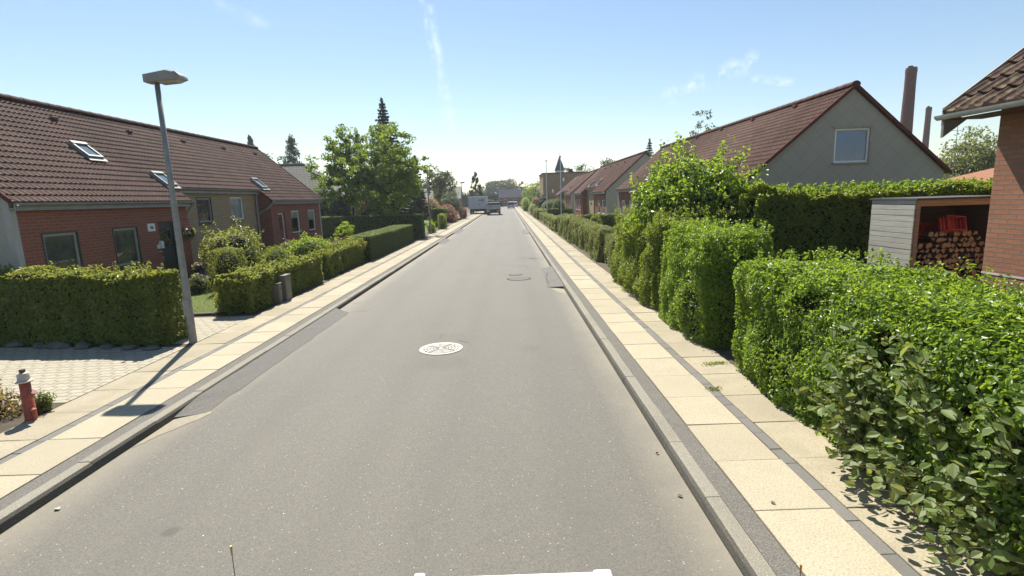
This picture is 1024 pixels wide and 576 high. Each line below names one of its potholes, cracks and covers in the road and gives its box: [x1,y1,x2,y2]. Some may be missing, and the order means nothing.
manhole cover [419,342,463,355]
